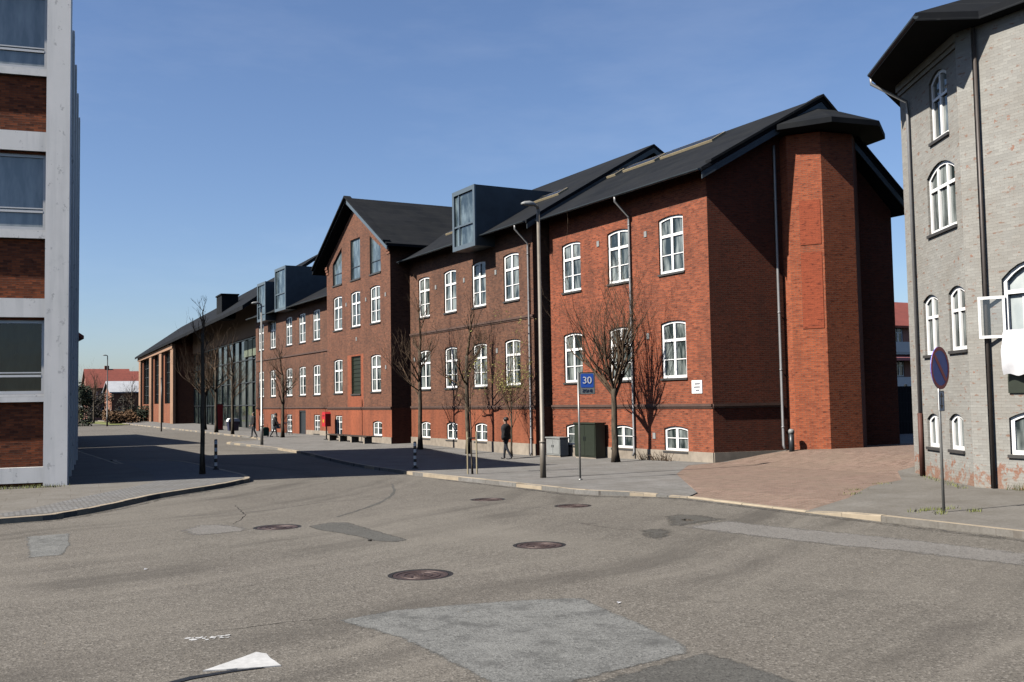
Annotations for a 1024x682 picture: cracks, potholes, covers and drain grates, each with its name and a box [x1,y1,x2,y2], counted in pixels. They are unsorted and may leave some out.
manhole cover [388,569,453,580]
manhole cover [513,541,566,549]
